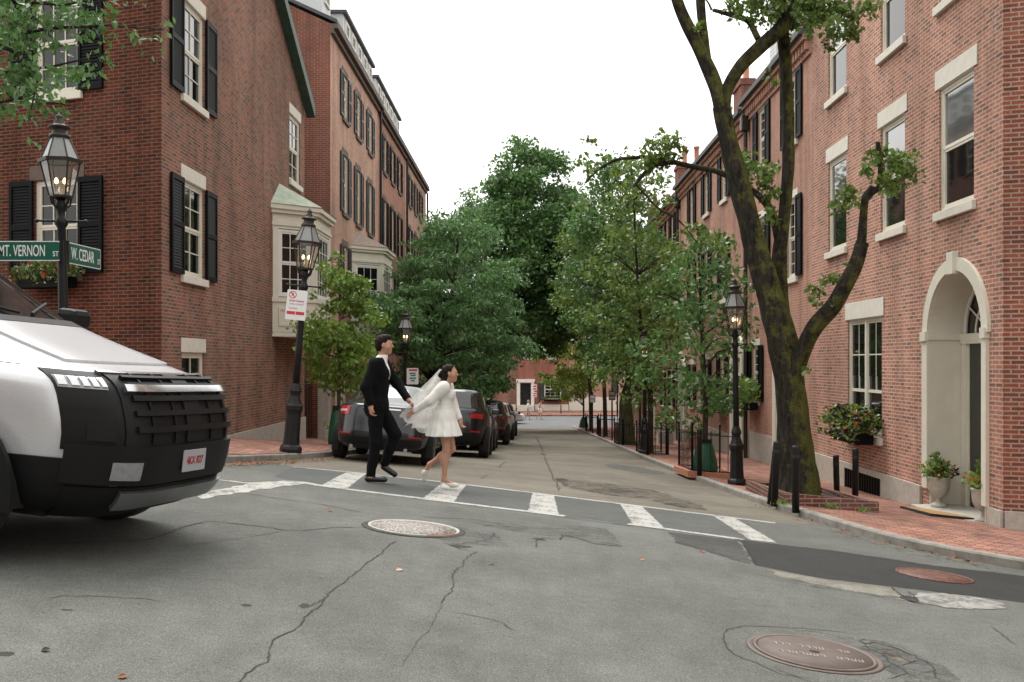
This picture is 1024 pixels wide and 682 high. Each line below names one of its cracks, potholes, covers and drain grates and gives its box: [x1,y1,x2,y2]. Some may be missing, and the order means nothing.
manhole cover [361,519,466,538]
manhole cover [895,567,974,584]
manhole cover [746,634,885,675]
crack [400,607,515,666]
crack [239,541,397,682]
